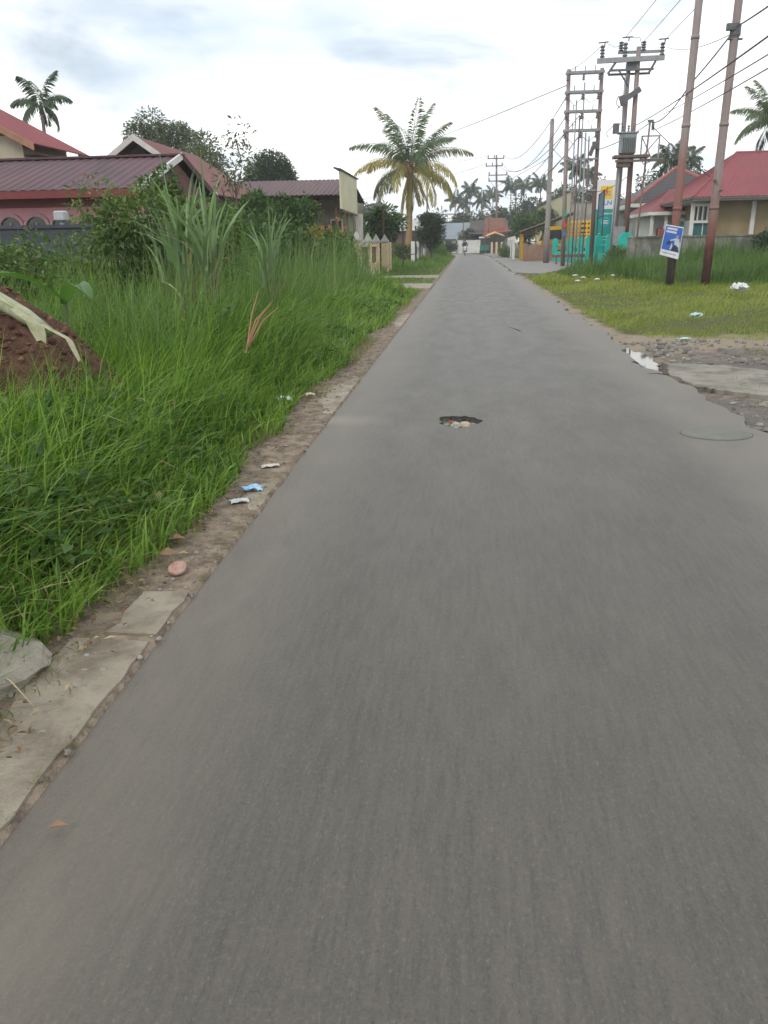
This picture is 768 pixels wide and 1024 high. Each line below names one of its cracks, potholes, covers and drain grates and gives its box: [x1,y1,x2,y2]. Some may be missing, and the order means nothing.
manhole cover [680,427,753,441]
pothole [439,416,483,424]
